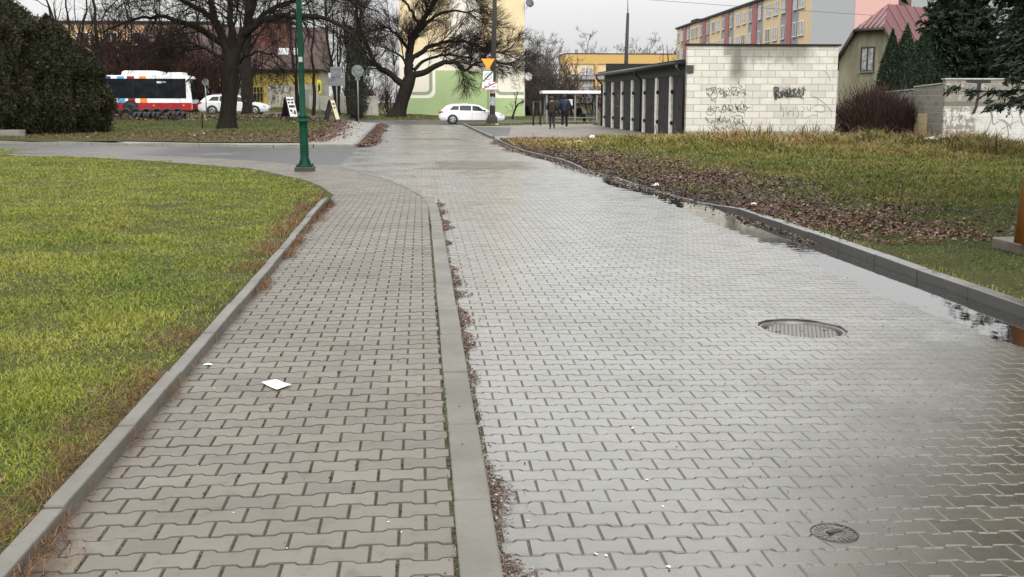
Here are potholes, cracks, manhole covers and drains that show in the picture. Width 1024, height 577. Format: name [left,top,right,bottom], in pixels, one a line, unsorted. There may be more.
manhole cover [758,320,847,338]
manhole cover [810,523,859,543]
